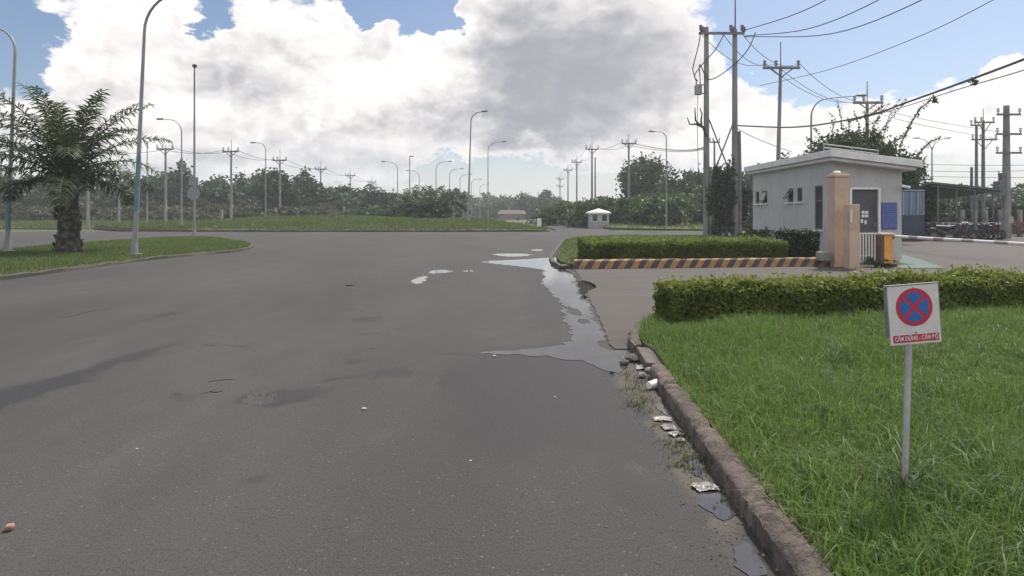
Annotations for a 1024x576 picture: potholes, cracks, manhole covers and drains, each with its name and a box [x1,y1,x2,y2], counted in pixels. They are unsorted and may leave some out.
pothole [242,392,278,405]
